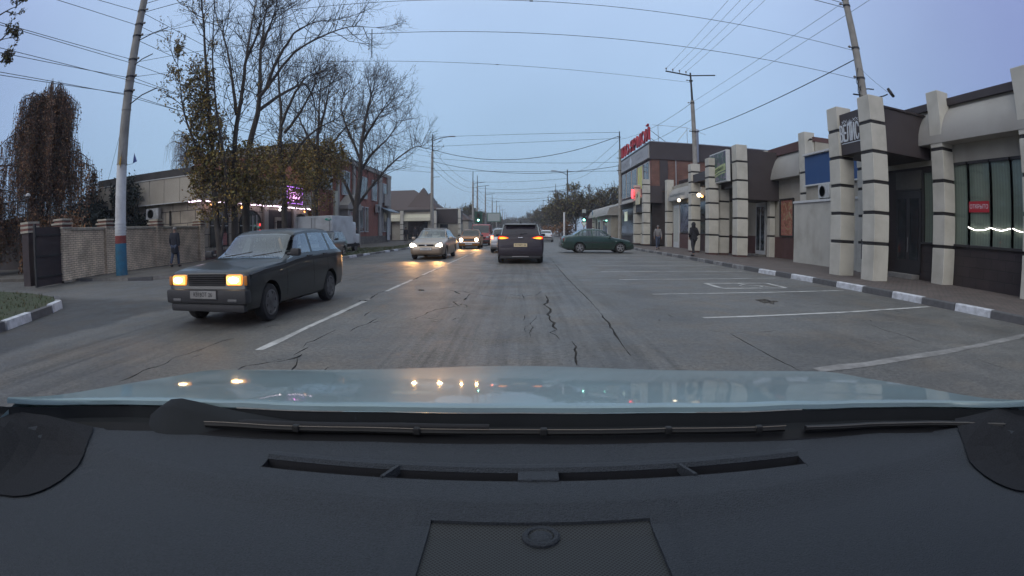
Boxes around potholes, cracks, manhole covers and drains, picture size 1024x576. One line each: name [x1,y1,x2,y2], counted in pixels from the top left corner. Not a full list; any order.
crack [238,269,437,370]
crack [415,282,578,365]
crack [118,338,233,382]
